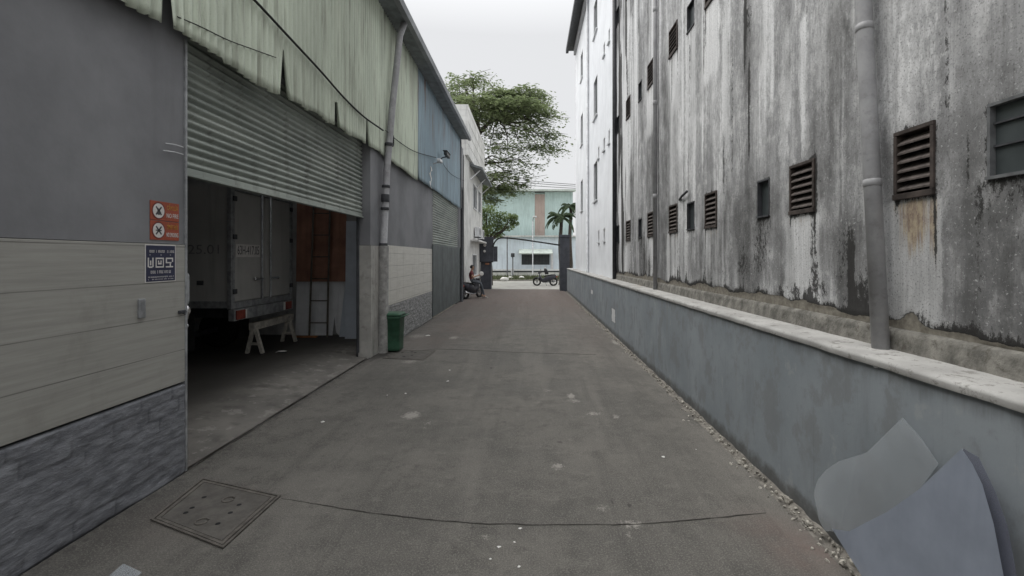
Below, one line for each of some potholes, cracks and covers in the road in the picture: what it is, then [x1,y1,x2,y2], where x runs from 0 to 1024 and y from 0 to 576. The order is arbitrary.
manhole cover [150,478,281,549]
